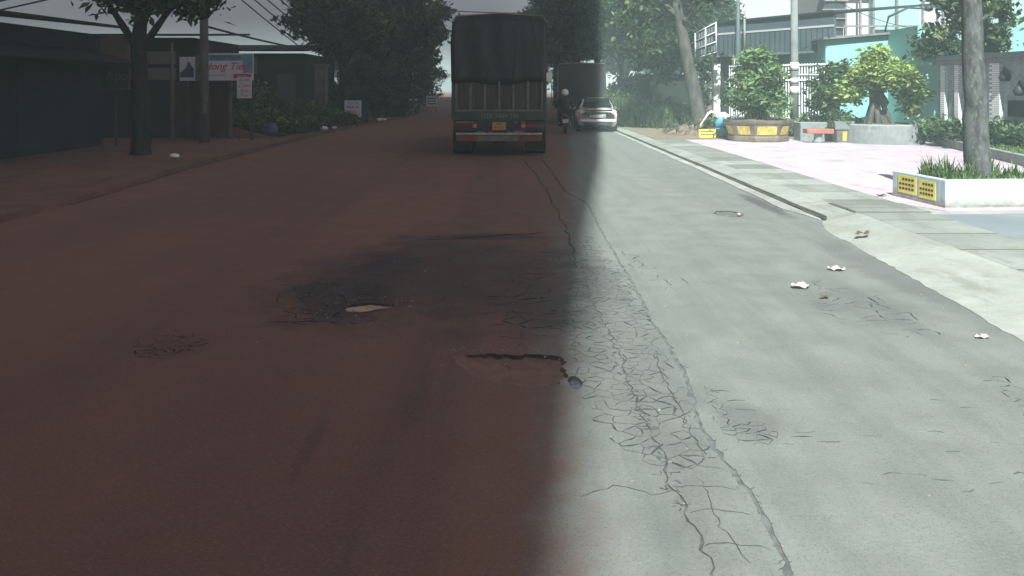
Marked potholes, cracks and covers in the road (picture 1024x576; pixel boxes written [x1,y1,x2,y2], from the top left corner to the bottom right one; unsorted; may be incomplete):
pothole [452,353,569,387]
crack [134,330,209,359]
crack [431,158,1023,576]
pothole [342,303,394,312]
pothole [567,376,583,390]
